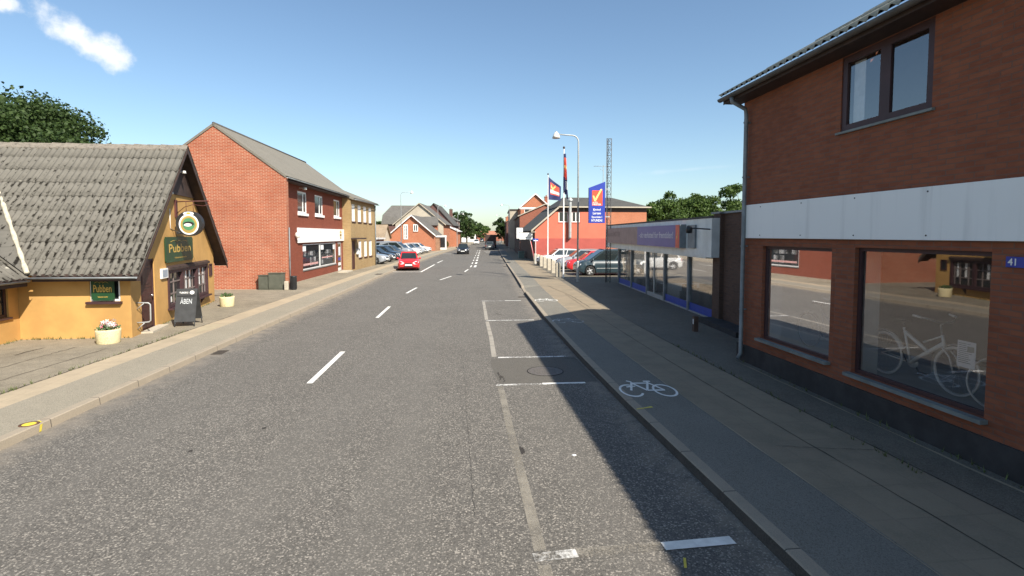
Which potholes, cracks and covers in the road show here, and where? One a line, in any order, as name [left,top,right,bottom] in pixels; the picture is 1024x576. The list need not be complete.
crack [463,363,475,513]
manhole cover [527,366,564,376]
